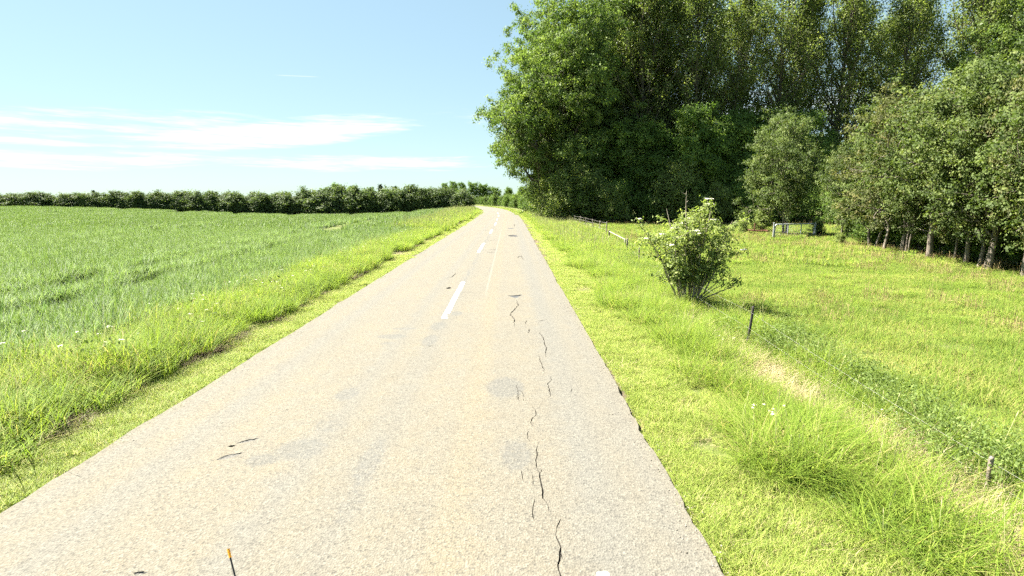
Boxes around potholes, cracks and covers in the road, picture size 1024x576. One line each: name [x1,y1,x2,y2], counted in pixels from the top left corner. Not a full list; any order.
crack [510,300,562,576]
